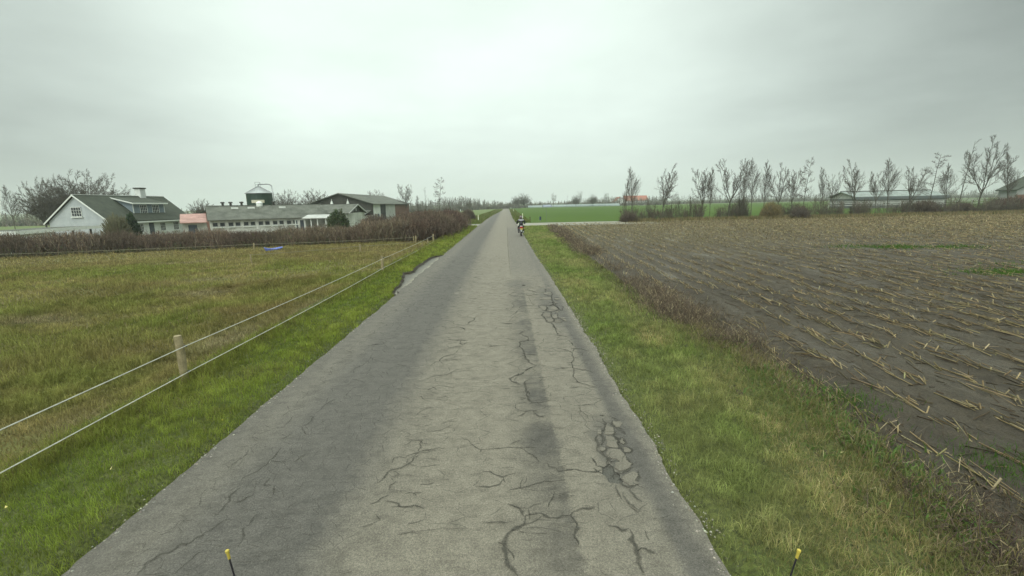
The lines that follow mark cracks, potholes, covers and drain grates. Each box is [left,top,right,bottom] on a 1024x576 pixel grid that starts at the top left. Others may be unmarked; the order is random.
crack [129,253,669,576]
